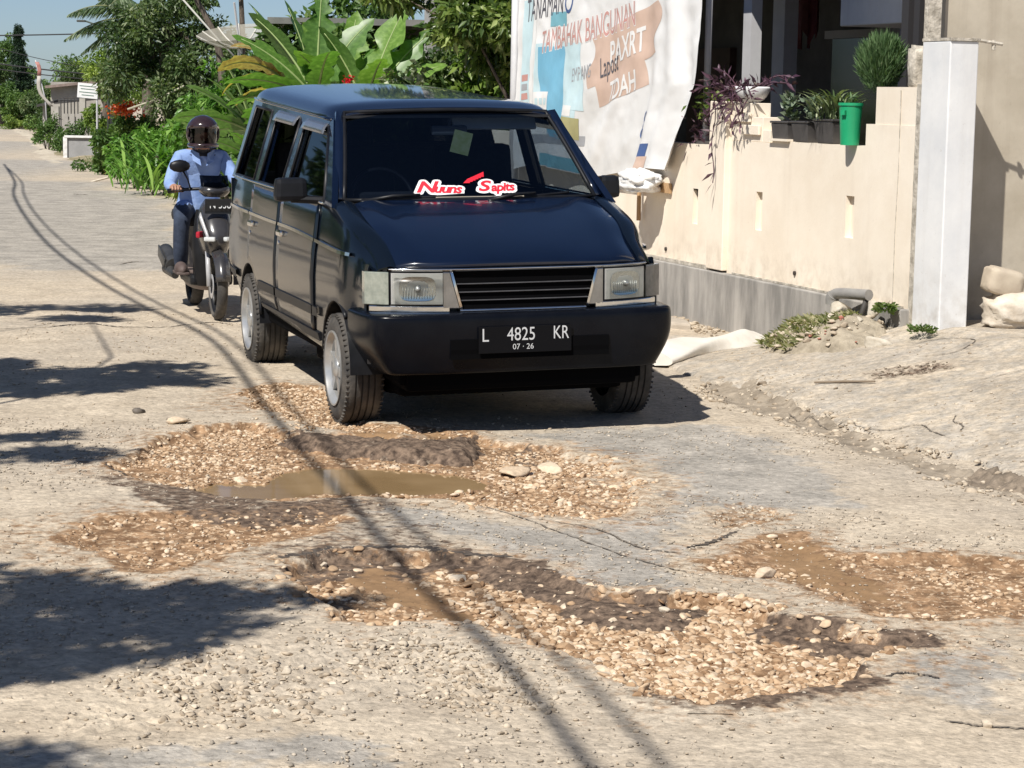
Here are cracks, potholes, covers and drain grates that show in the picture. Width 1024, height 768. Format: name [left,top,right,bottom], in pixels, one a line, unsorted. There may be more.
pothole [254,543,967,715]
pothole [23,502,365,578]
pothole [678,530,1024,625]
crack [946,720,1024,729]
crack [481,505,737,572]
pothole [86,420,665,526]
crack [789,414,964,435]
